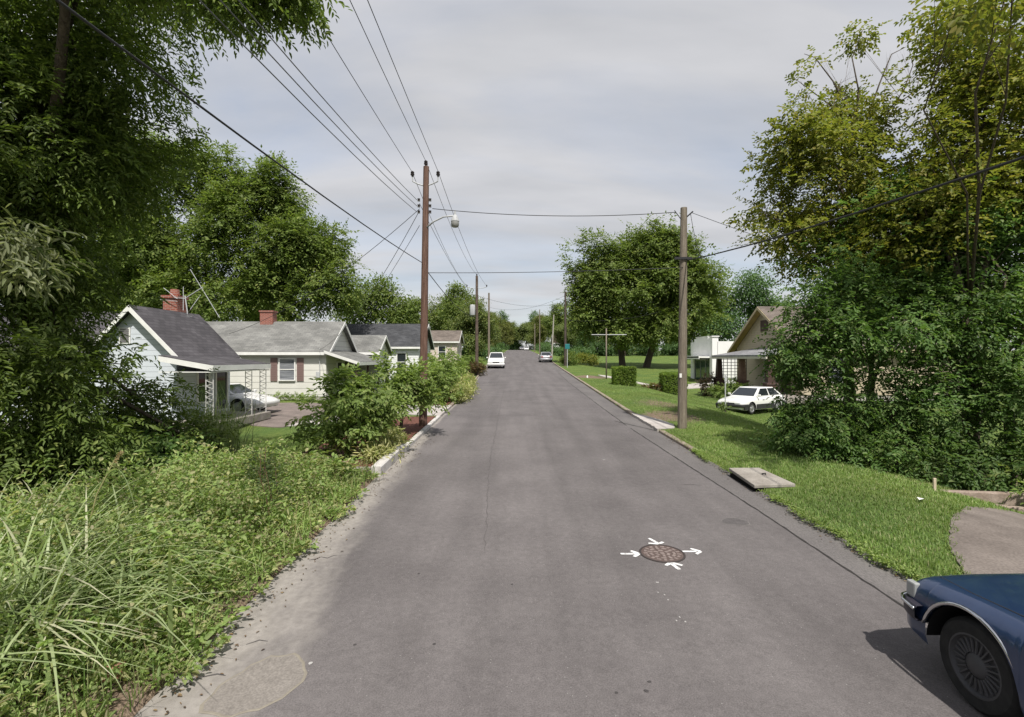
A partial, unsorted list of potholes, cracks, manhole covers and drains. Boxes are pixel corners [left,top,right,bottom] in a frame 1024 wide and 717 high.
manhole cover [639,544,686,563]
crack [483,396,503,549]
